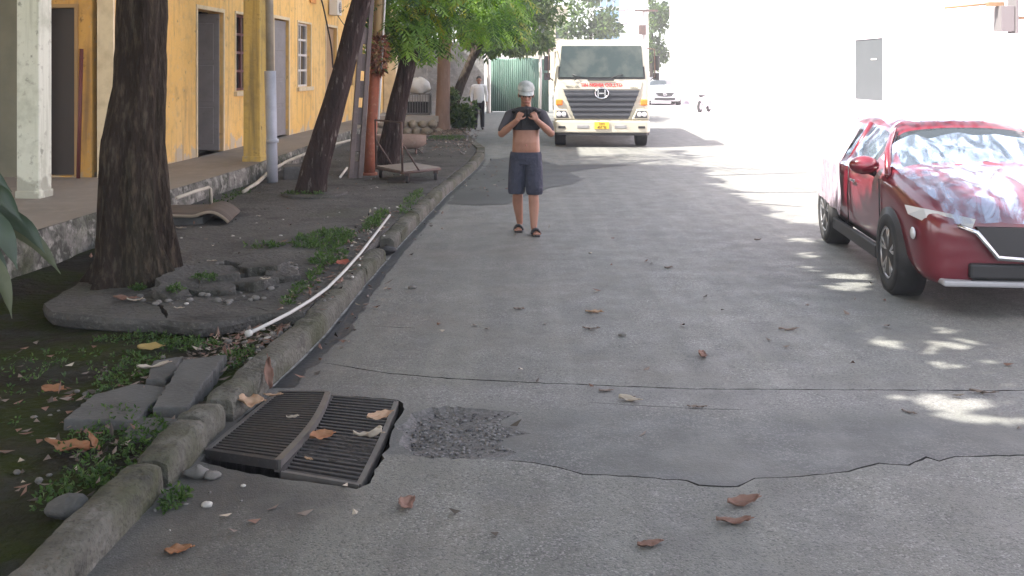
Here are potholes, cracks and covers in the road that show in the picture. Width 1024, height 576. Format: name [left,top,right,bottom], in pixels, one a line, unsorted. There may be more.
pothole [398,406,531,460]
crack [145,302,168,318]
crack [510,455,1024,487]
drain grate [280,395,399,489]
crack [327,363,1022,410]
